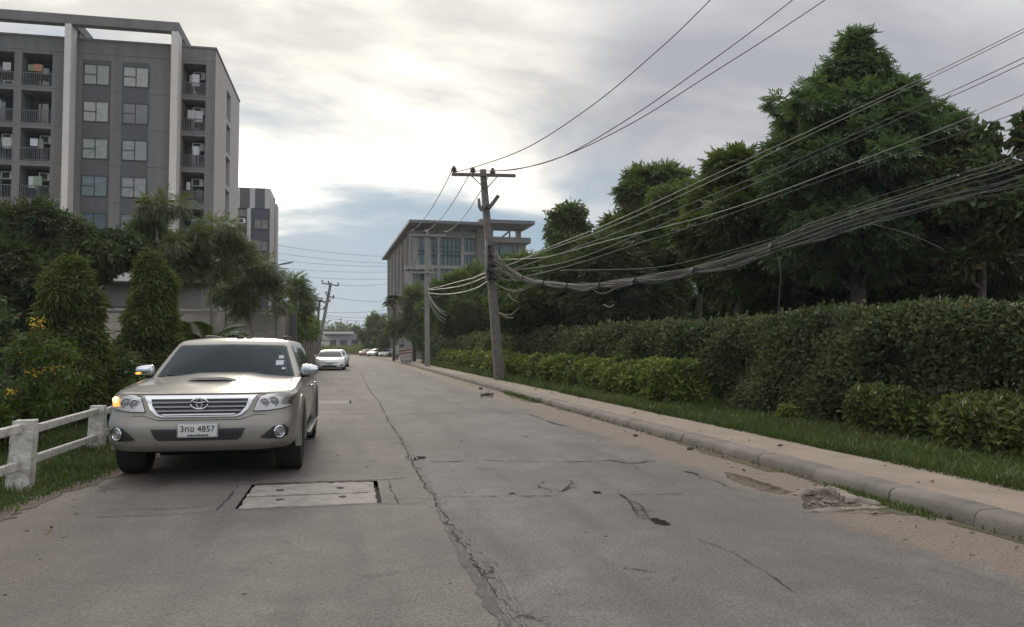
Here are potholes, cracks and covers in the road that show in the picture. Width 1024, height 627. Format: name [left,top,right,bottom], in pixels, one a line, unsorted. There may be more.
pothole [724,472,793,495]
crack [699,539,795,592]
manhole cover [235,482,382,509]
crack [618,493,656,519]
